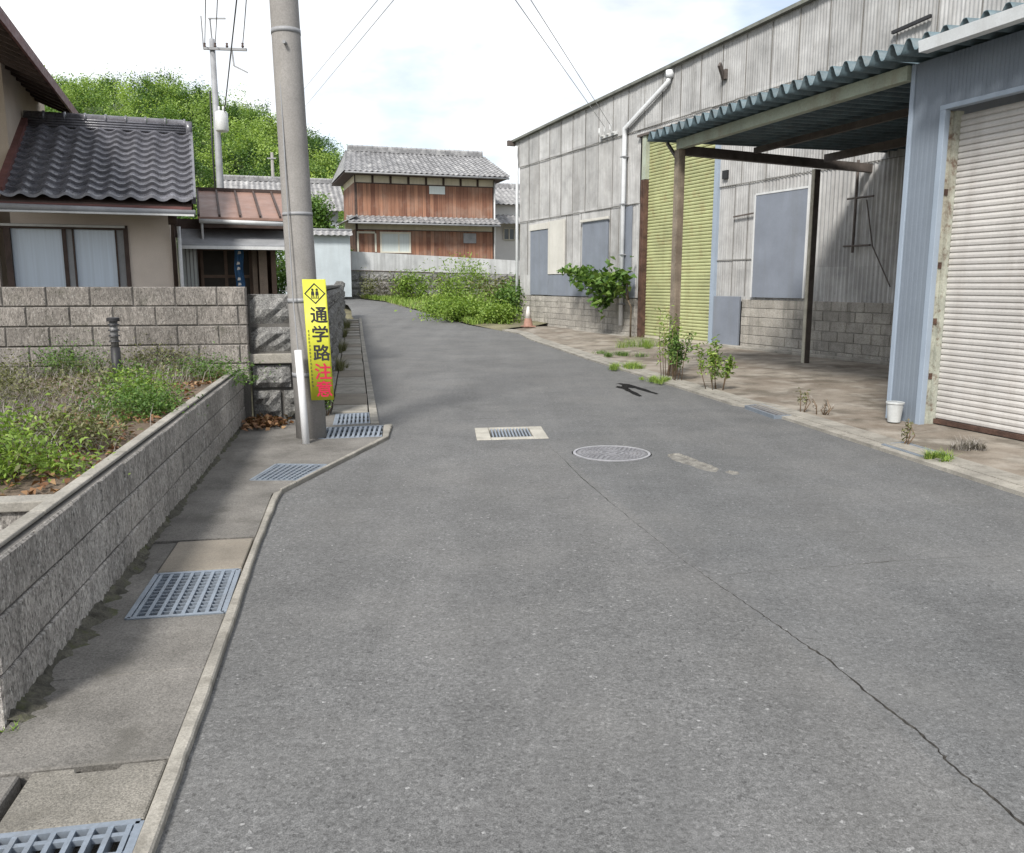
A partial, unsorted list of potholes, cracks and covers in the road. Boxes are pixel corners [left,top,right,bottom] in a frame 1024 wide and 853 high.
drain grate [0,818,145,853]
drain grate [124,568,241,620]
drain grate [745,404,790,419]
drain grate [475,426,548,440]
drain grate [333,412,371,425]
drain grate [318,425,384,439]
crack [550,447,1024,825]
drain grate [881,442,949,457]
manhole cover [573,445,651,462]
drain grate [250,463,328,480]
